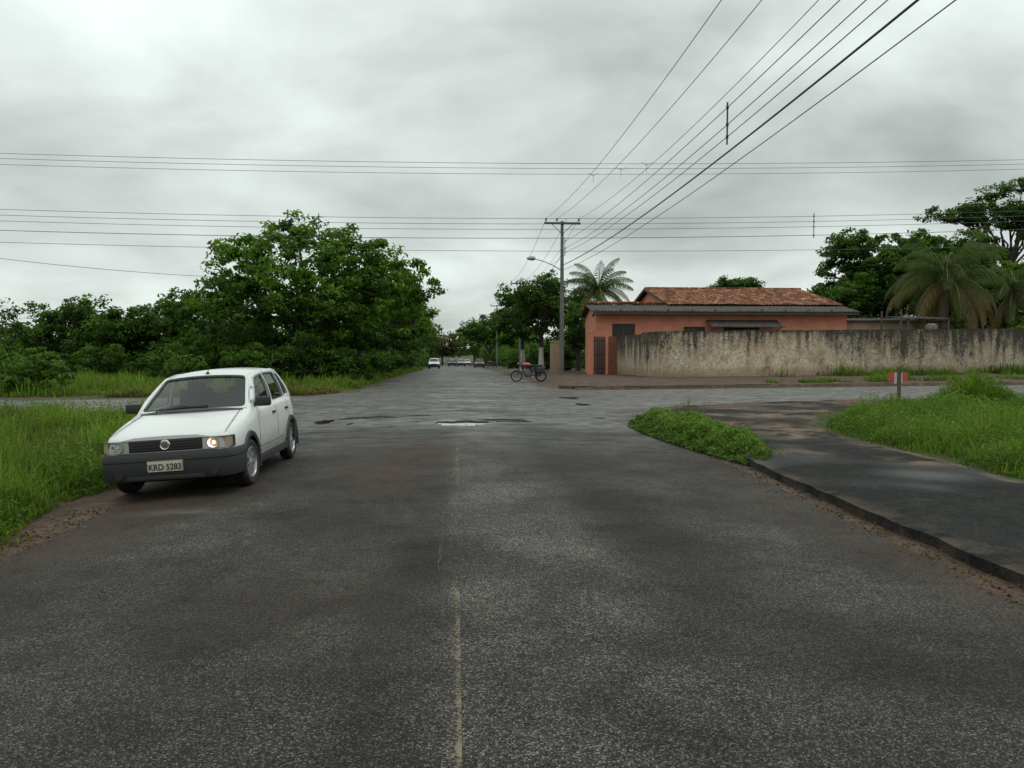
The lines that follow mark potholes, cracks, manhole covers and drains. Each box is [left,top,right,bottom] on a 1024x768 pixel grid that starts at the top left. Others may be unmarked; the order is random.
crack [437,494,448,586]
